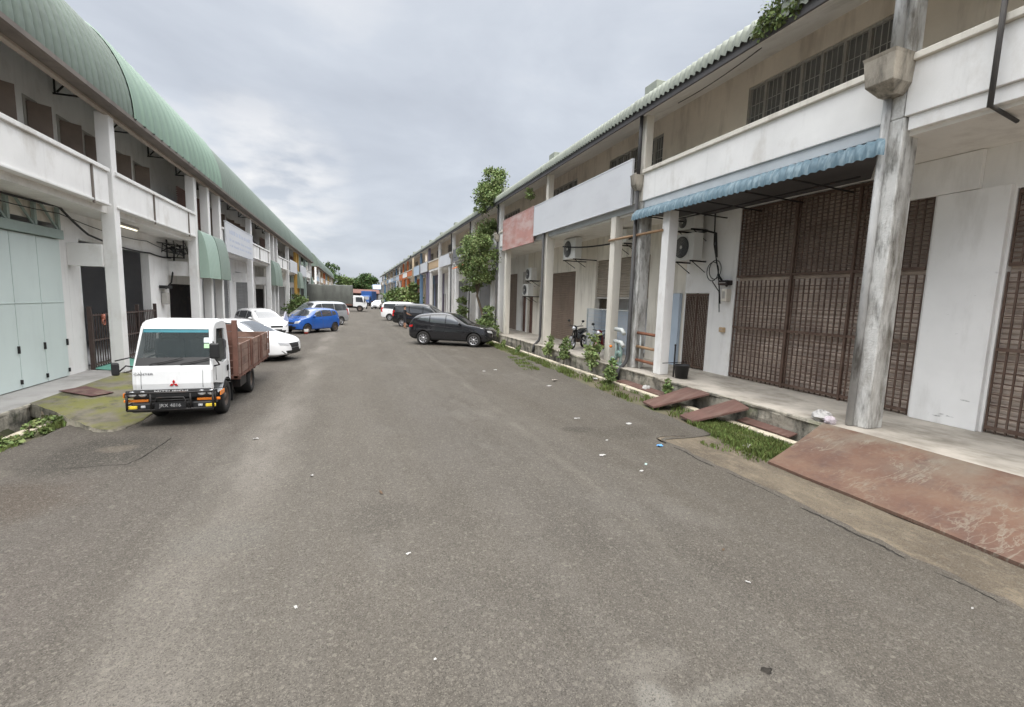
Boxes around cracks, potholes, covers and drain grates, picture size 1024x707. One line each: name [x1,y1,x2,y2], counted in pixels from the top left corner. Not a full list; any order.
crack [674,447,783,499]
crack [801,507,906,559]
crack [936,572,1004,605]
